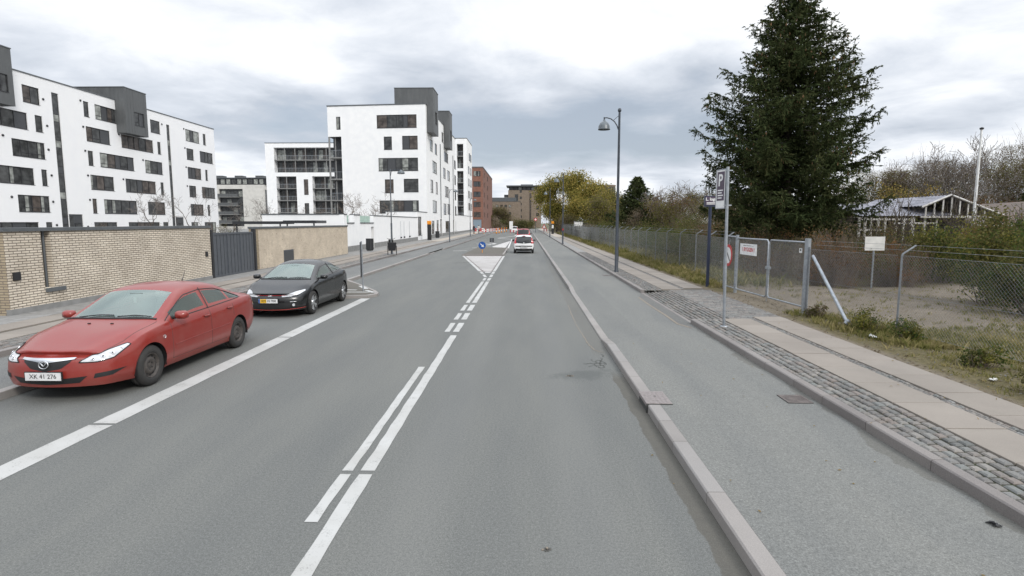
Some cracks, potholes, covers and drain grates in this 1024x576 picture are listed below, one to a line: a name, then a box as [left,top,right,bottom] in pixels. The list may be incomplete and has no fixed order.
manhole cover [638,391,673,415]
